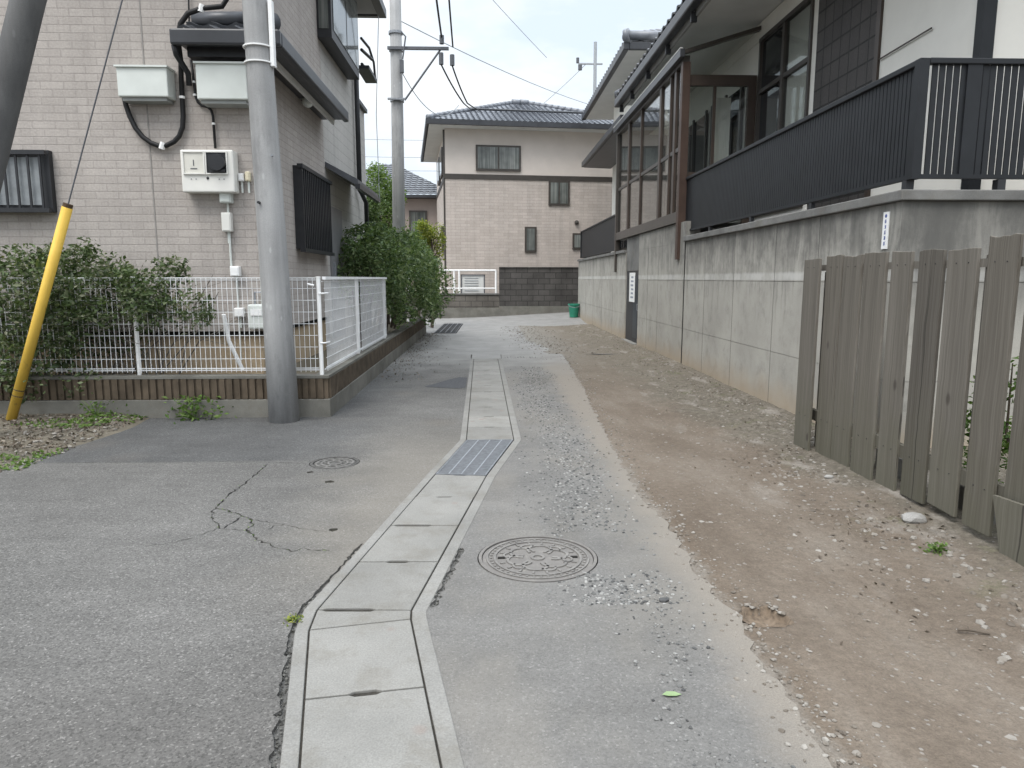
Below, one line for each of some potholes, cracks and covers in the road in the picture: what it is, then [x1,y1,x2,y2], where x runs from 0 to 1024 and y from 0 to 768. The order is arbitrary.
manhole cover [478,536,597,583]
drain grate [434,323,462,333]
pothole [739,605,795,628]
drain grate [436,439,513,476]
manhole cover [310,456,359,469]
